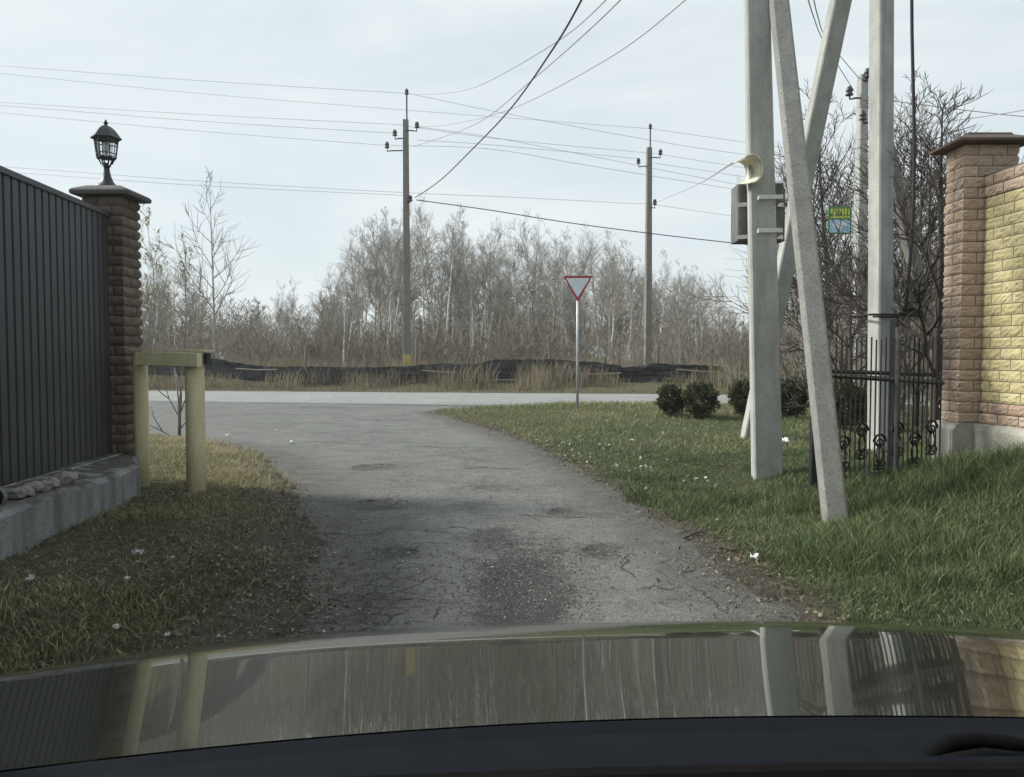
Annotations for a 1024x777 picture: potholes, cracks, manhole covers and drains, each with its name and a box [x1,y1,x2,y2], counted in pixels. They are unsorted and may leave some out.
crack [293,526,465,632]
crack [592,548,722,611]
